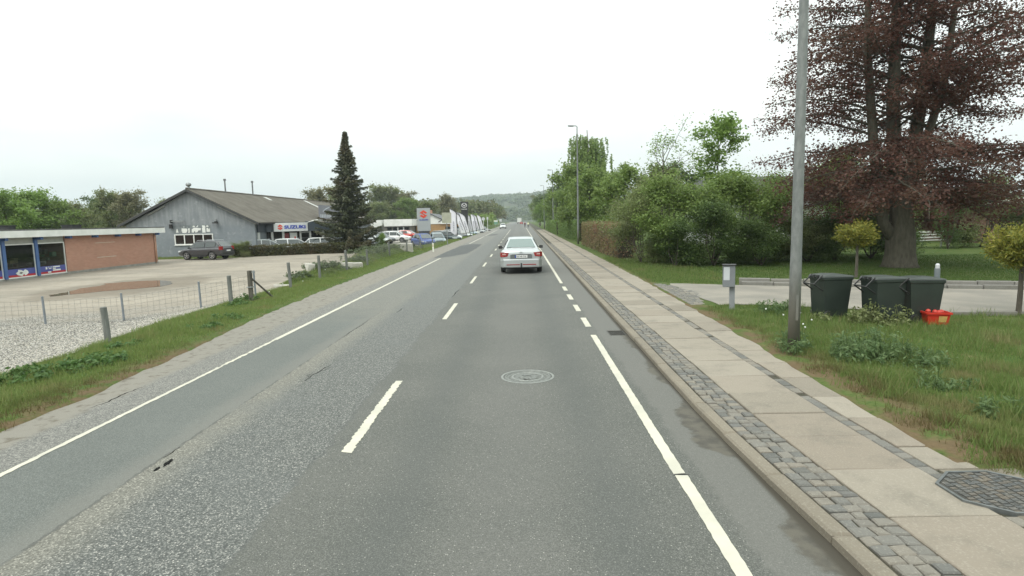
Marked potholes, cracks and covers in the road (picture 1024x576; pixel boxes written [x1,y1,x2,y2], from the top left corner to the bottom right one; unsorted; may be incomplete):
manhole cover [935,470,1024,517]
manhole cover [501,370,554,384]
